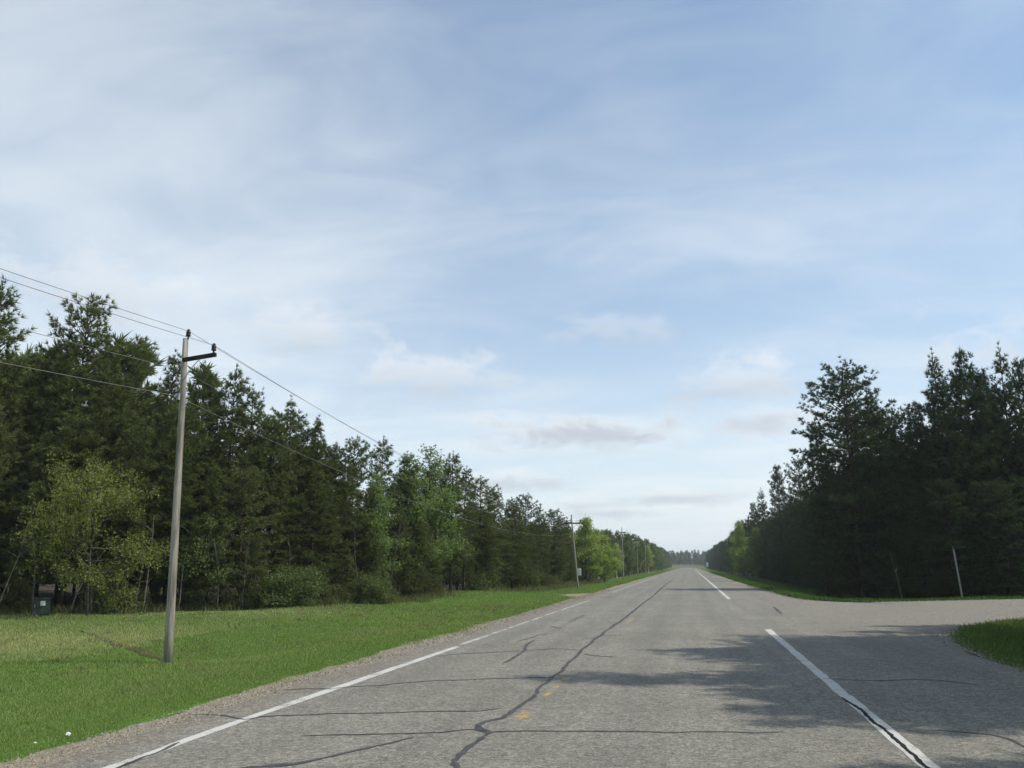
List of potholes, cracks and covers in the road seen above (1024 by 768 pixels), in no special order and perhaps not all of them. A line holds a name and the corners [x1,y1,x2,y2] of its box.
crack [822,678,1024,768]
crack [195,708,498,720]
crack [240,729,783,768]
